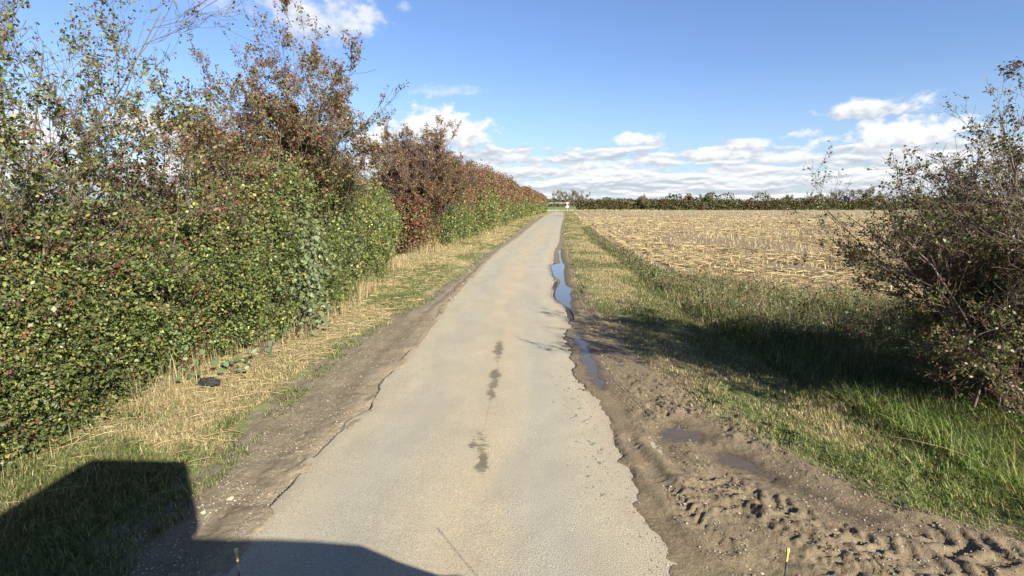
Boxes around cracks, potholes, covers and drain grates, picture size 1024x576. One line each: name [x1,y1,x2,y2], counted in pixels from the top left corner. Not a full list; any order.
pothole [551,281,574,321]
